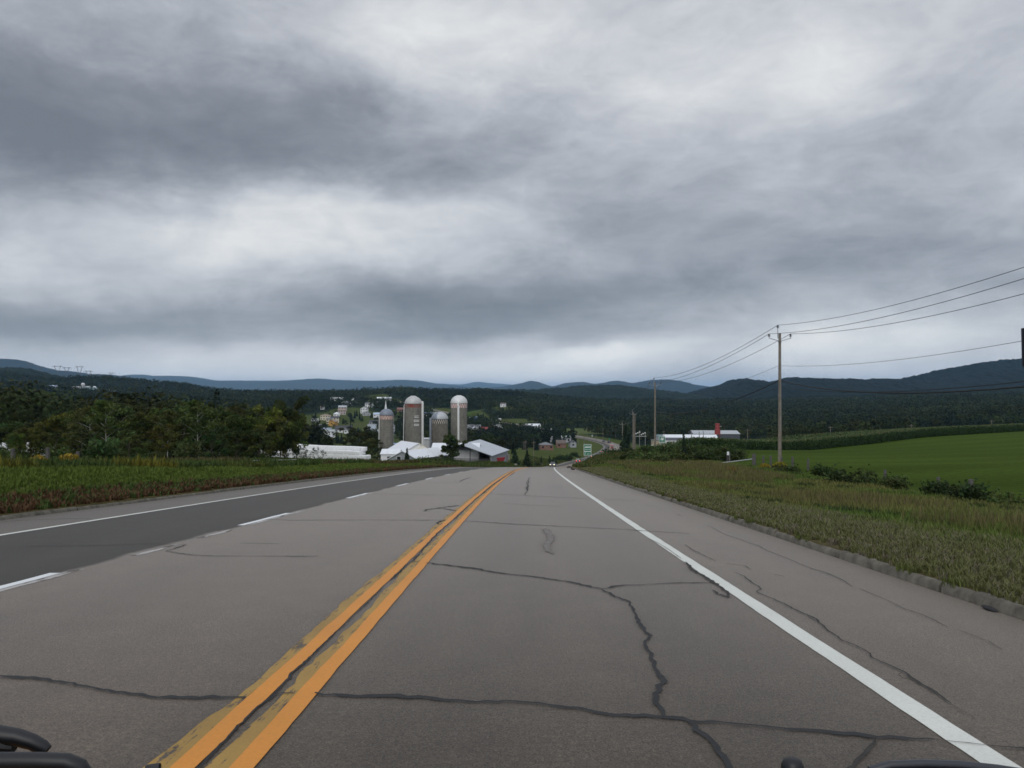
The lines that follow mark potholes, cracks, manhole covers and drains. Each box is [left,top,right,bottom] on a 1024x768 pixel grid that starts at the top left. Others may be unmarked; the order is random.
crack [2,469,975,768]
